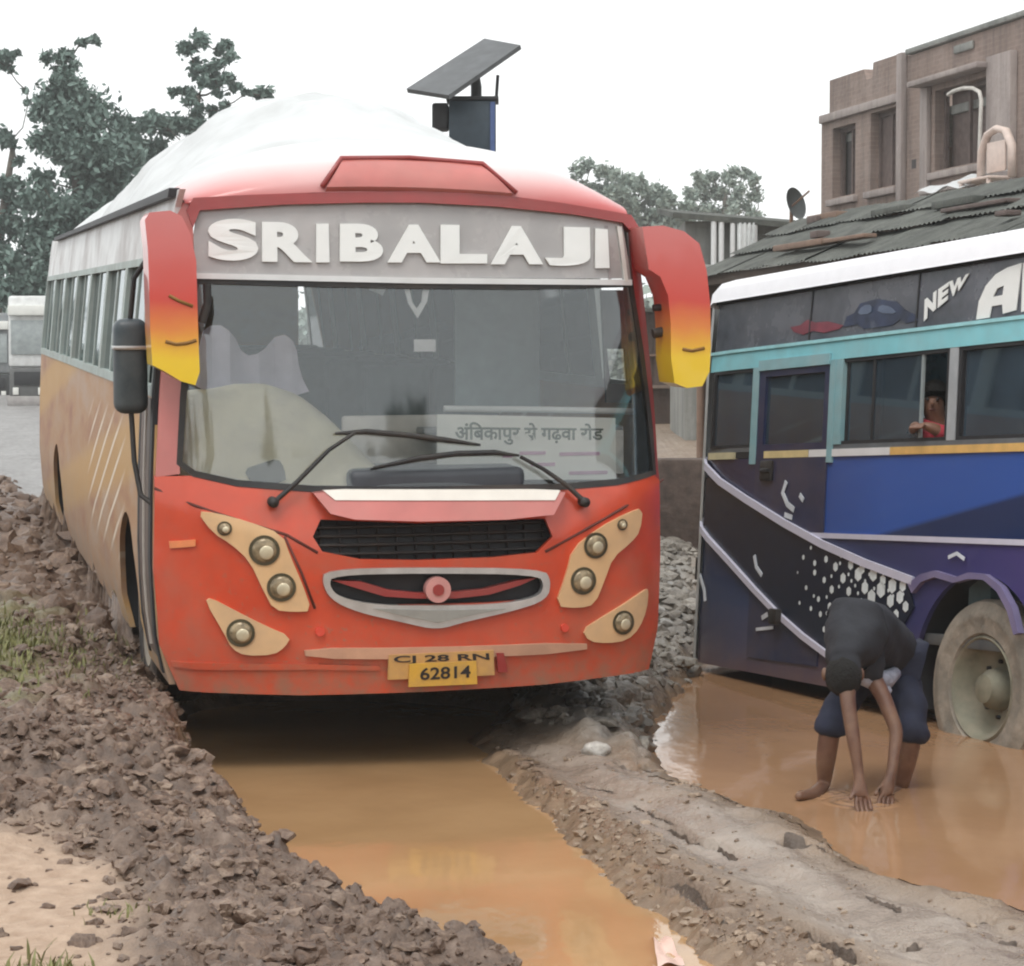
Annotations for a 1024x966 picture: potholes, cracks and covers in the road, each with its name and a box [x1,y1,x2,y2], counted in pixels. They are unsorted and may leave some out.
crack [717,847,738,861]
pothole [637,662,1024,912]
crack [634,805,700,846]
crack [866,896,901,912]
pothole [179,692,759,966]
